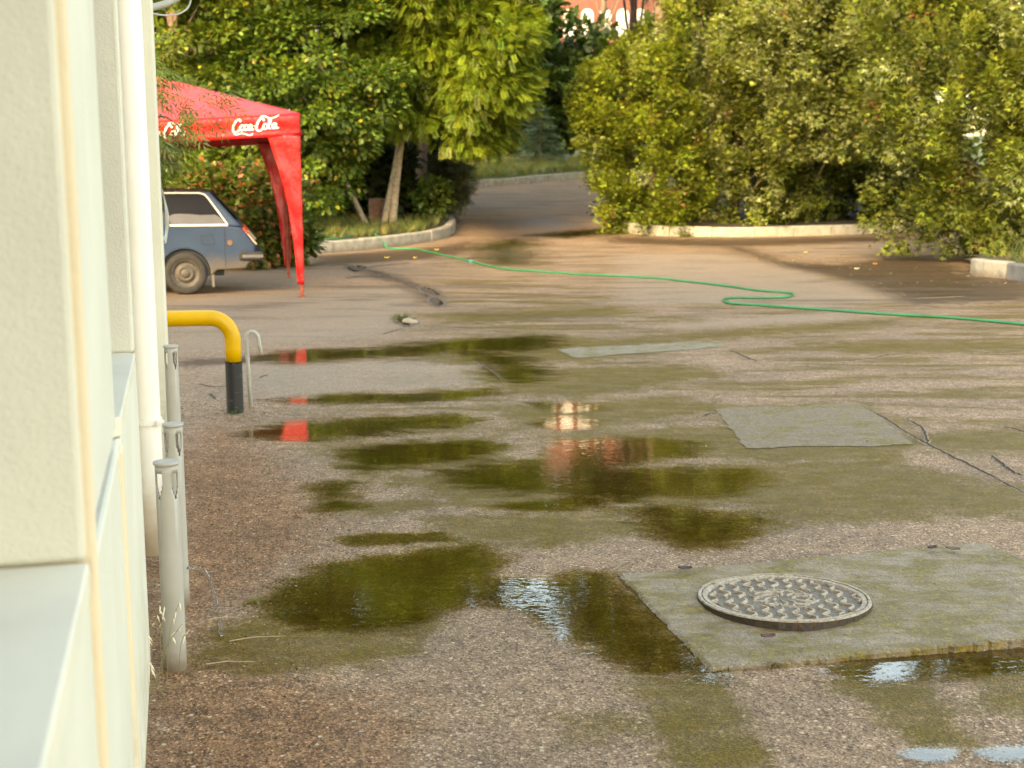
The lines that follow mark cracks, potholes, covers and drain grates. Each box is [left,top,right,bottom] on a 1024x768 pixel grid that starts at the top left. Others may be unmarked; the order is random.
crack [856,402,1024,494]
manhole cover [697,573,873,632]
crack [728,350,758,362]
